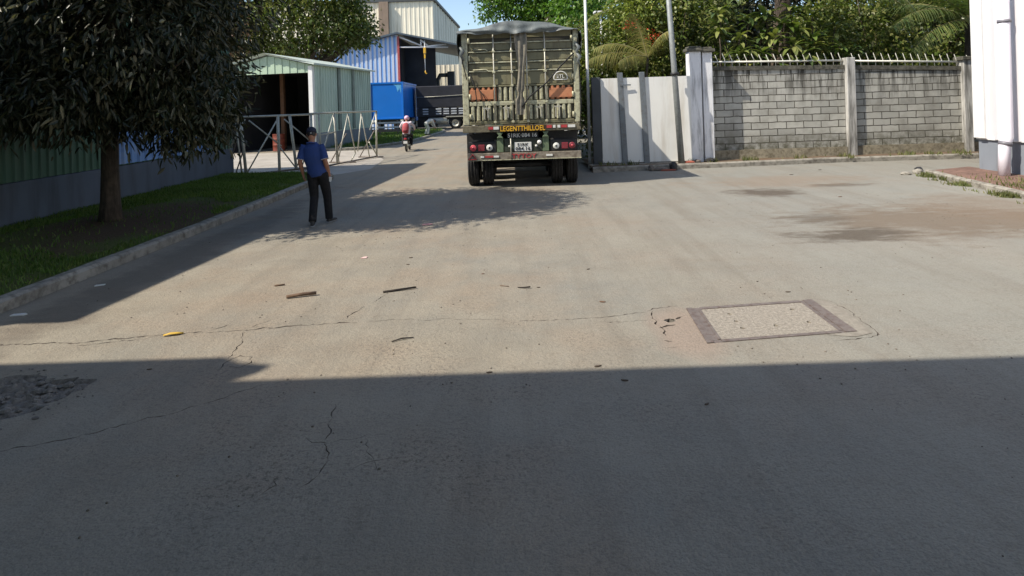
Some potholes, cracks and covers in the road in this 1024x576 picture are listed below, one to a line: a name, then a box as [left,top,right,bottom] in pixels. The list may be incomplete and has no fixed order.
crack [649,306,682,348]
crack [1,297,645,368]
pothole [0,368,97,430]
crack [4,387,255,451]
crack [259,404,384,496]
manhole cover [686,299,872,344]
